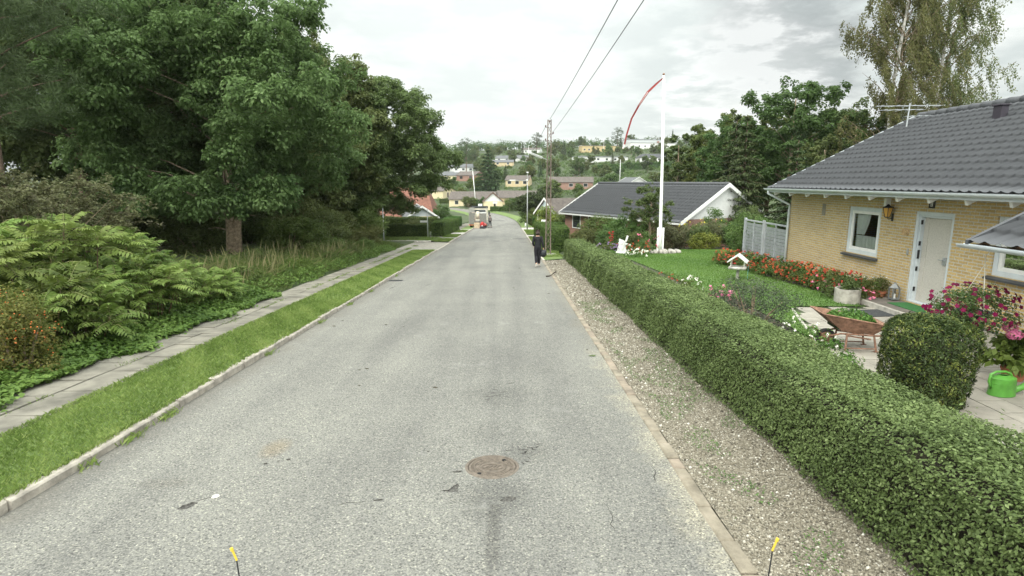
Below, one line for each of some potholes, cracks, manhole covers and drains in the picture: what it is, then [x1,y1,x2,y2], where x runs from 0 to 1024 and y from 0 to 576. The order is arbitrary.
manhole cover [465,455,519,479]
